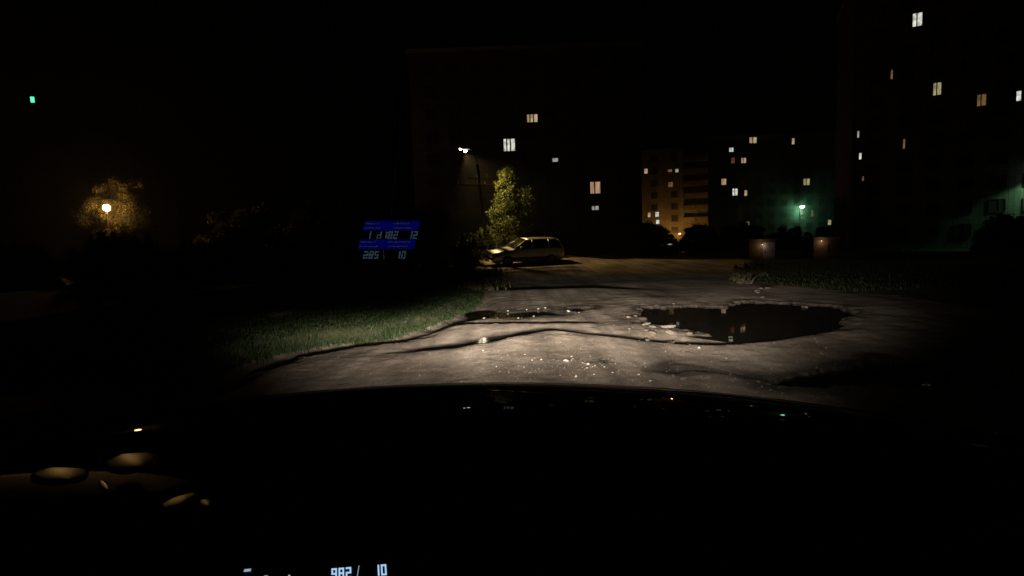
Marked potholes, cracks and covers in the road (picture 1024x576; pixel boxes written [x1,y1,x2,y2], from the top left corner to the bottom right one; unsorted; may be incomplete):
pothole [631,300,874,343]
pothole [465,308,566,322]
